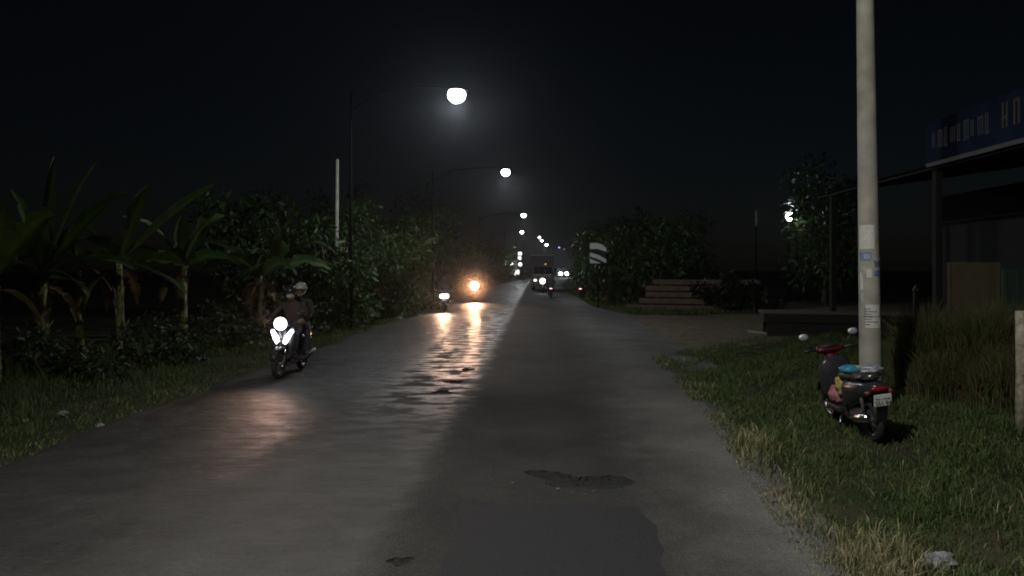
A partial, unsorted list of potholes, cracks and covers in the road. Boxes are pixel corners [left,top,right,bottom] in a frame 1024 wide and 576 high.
pothole [385,557,415,567]
pothole [524,470,635,489]
